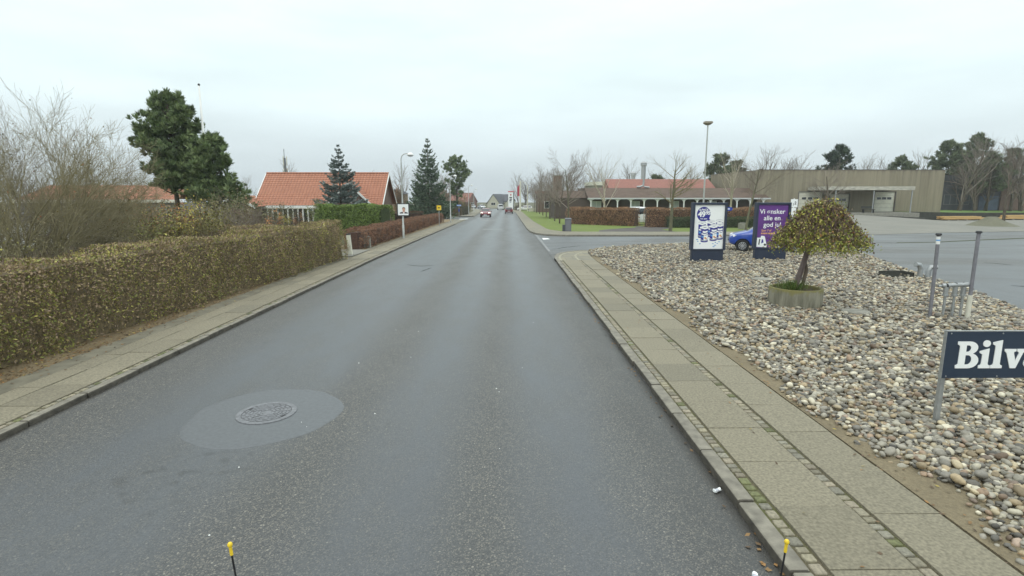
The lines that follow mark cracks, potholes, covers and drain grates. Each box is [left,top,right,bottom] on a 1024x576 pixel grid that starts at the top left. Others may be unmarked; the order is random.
manhole cover [235,402,297,425]
